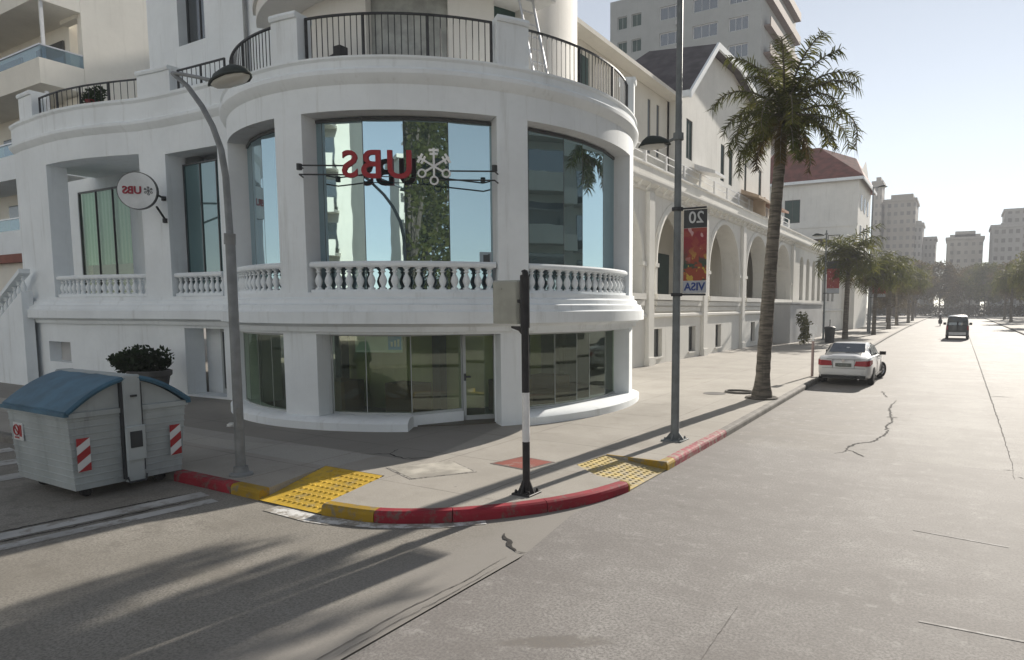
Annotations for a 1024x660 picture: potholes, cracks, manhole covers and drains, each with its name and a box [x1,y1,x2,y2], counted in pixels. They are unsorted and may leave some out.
crack [503,533,523,553]
crack [834,391,897,456]
crack [969,337,1021,478]
utility cover [387,460,476,480]
